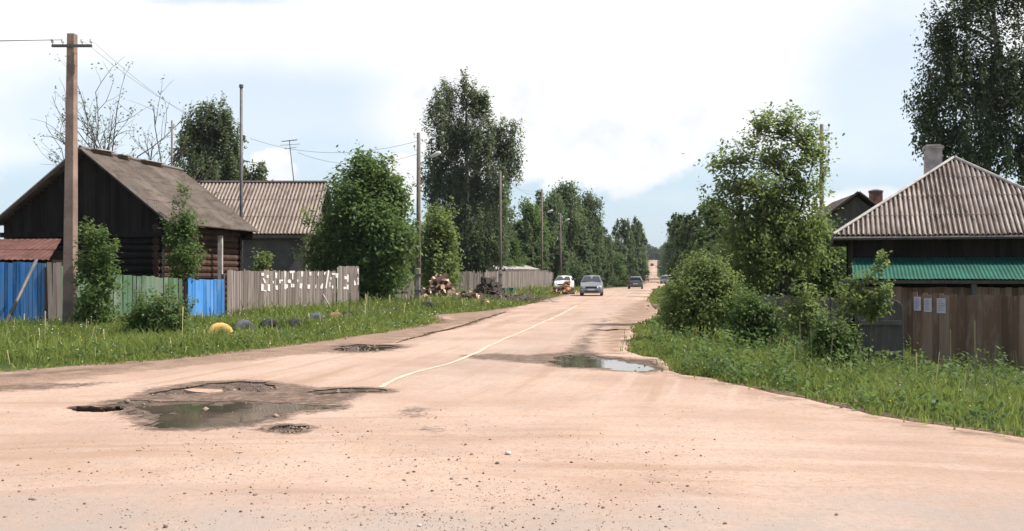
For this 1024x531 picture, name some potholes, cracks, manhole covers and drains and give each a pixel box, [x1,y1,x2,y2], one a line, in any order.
pothole [553,353,661,371]
pothole [261,425,312,433]
pothole [149,381,276,396]
pothole [334,344,400,352]
pothole [109,399,340,429]
